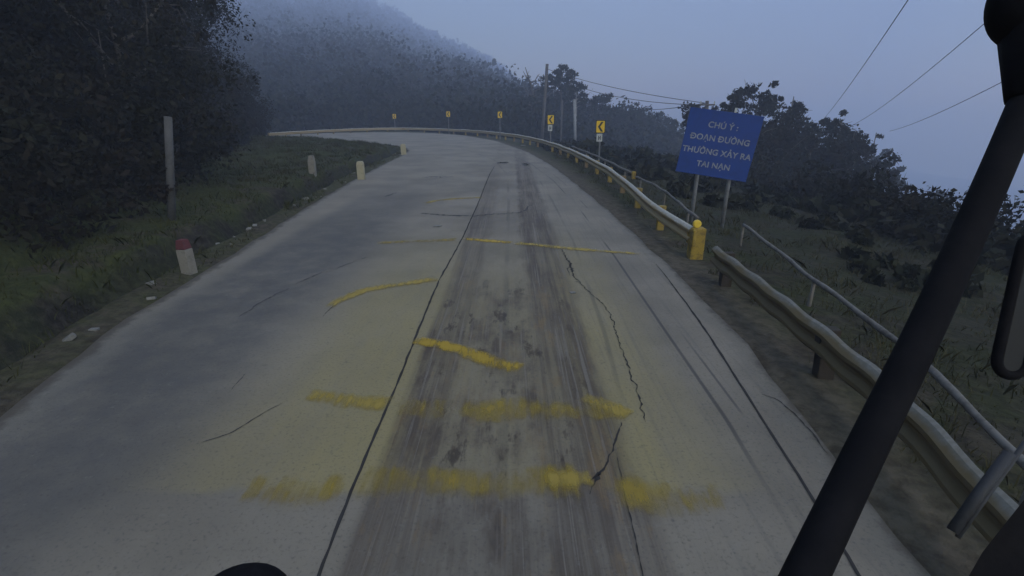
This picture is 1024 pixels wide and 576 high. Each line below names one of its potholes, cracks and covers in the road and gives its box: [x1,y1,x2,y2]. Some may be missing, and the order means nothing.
crack [240,257,366,316]
crack [561,249,646,576]
crack [421,205,532,216]
crack [203,404,280,442]
crack [763,394,827,453]
